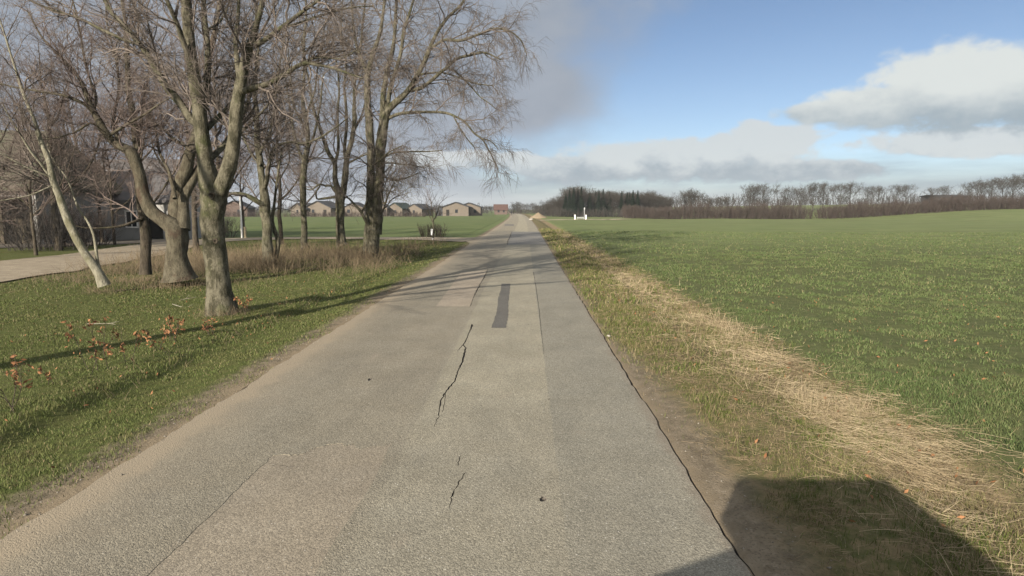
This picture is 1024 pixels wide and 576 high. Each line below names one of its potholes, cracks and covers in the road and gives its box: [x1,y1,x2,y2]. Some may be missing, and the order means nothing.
crack [434,324,473,427]
